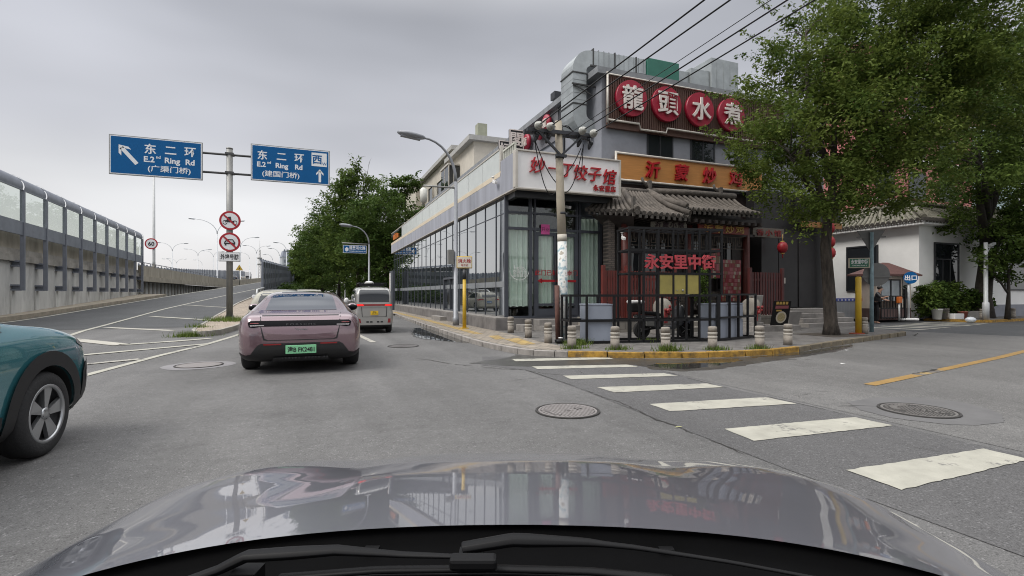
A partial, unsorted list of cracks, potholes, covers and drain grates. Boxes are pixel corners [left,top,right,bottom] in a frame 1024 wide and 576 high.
manhole cover [535,403,600,419]
manhole cover [877,402,963,419]
manhole cover [160,361,236,370]
